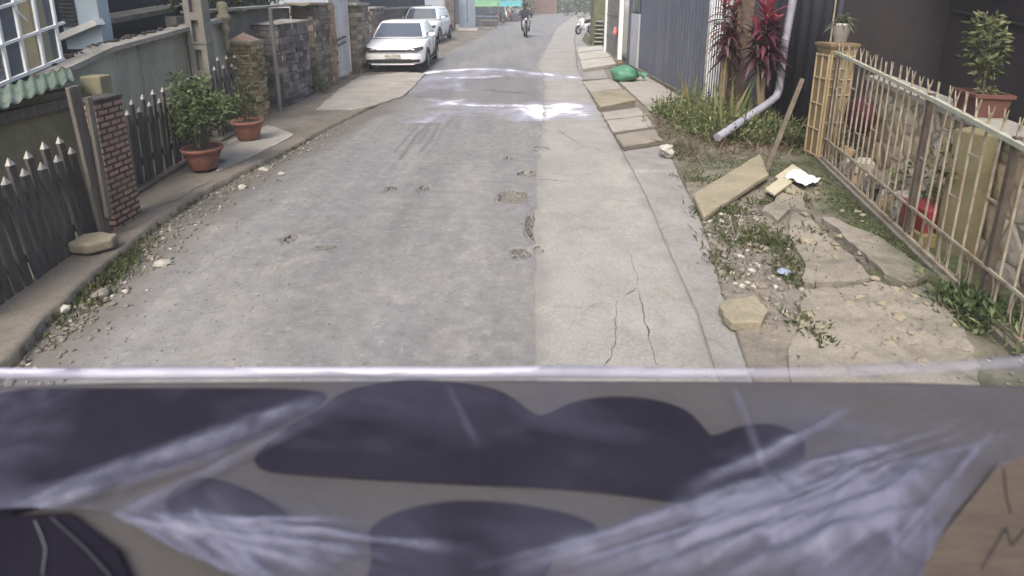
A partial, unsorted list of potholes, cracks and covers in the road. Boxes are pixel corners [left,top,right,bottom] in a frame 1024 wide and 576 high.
crack [540,254,659,367]
pothole [495,190,529,205]
pothole [524,212,535,244]
pothole [511,248,530,260]
